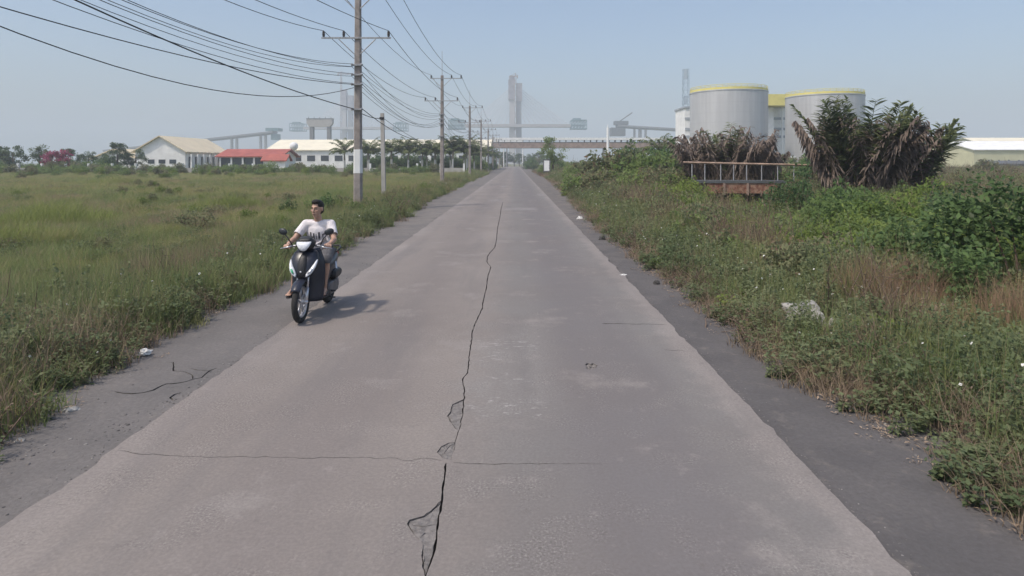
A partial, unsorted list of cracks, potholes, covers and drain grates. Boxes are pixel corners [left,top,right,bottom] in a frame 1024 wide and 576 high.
crack [119,203,588,576]
